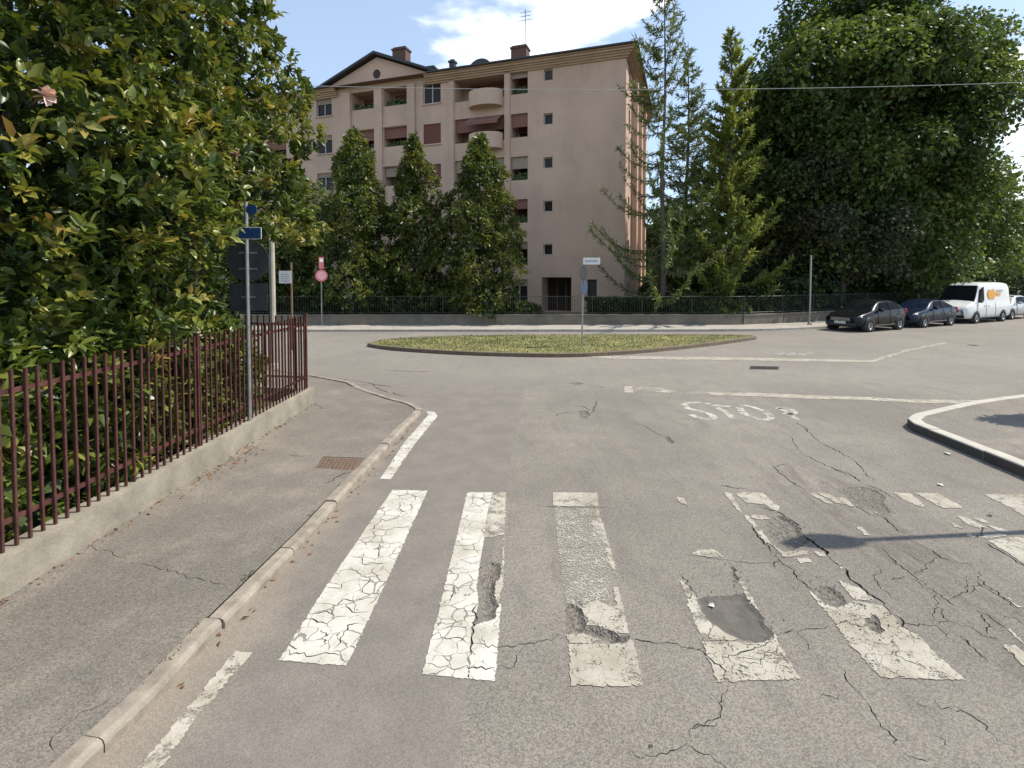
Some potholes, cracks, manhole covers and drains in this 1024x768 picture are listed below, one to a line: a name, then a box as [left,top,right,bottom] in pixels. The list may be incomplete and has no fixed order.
crack [433,484,1024,768]
pothole [564,603,631,644]
pothole [477,561,502,622]
crack [771,423,868,493]
crack [345,370,428,397]
crack [49,704,103,752]
manhole cover [316,456,364,470]
crack [90,546,229,591]
